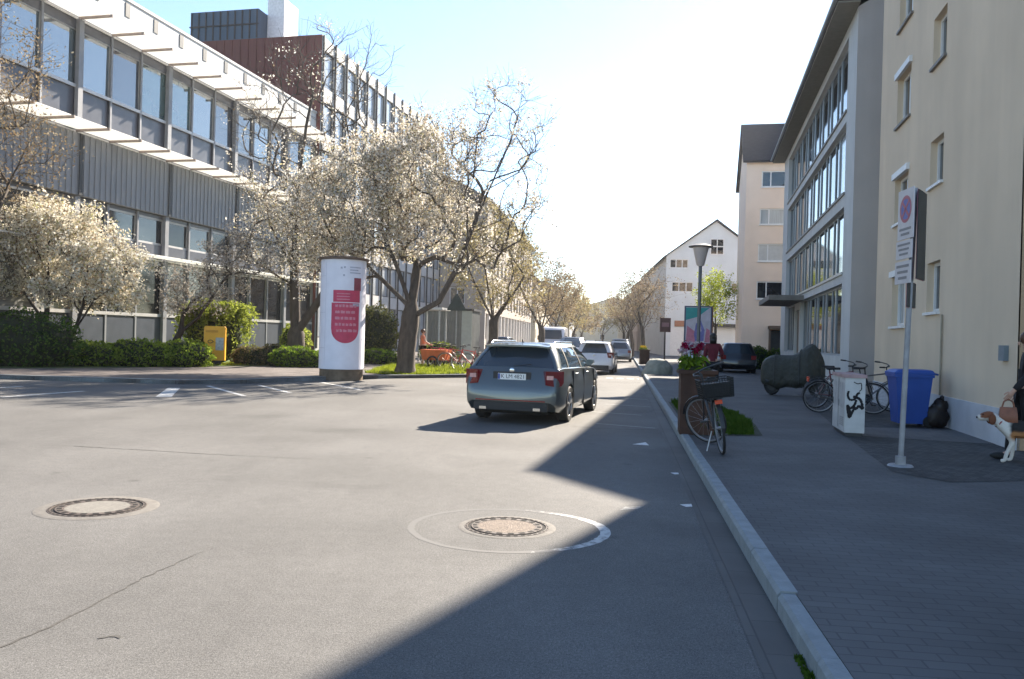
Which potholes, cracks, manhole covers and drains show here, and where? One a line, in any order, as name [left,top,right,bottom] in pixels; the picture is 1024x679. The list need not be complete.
crack [0,550,205,648]
manhole cover [32,496,160,520]
manhole cover [458,516,556,539]
